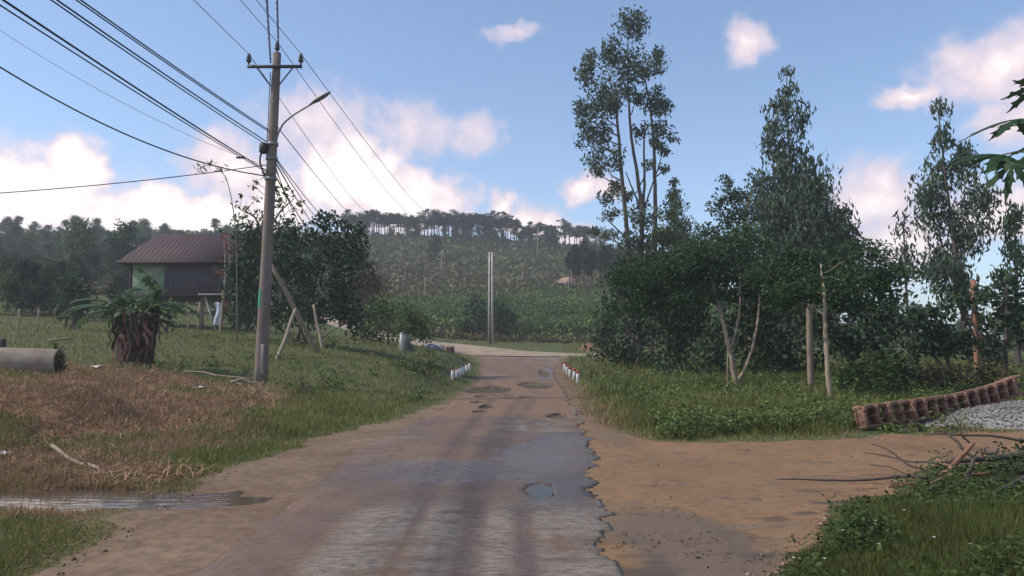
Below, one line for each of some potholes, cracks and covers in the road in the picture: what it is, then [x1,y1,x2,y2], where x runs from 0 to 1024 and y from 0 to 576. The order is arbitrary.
pothole [524,483,554,498]
pothole [463,386,512,394]
